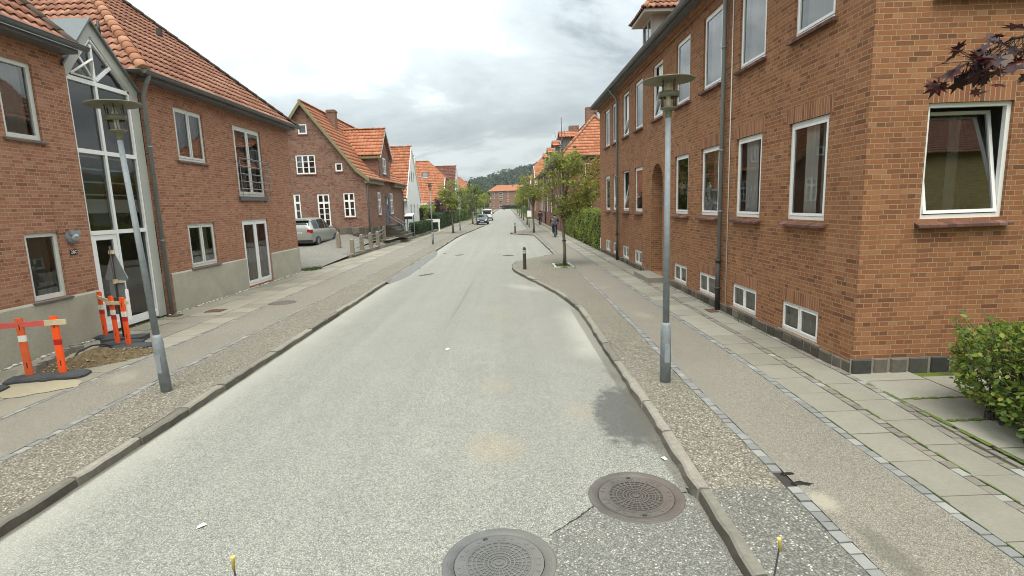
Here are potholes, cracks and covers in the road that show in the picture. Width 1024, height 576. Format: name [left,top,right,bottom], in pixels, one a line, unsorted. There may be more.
manhole cover [442,528,557,576]
manhole cover [588,472,686,524]
crack [549,505,594,536]
